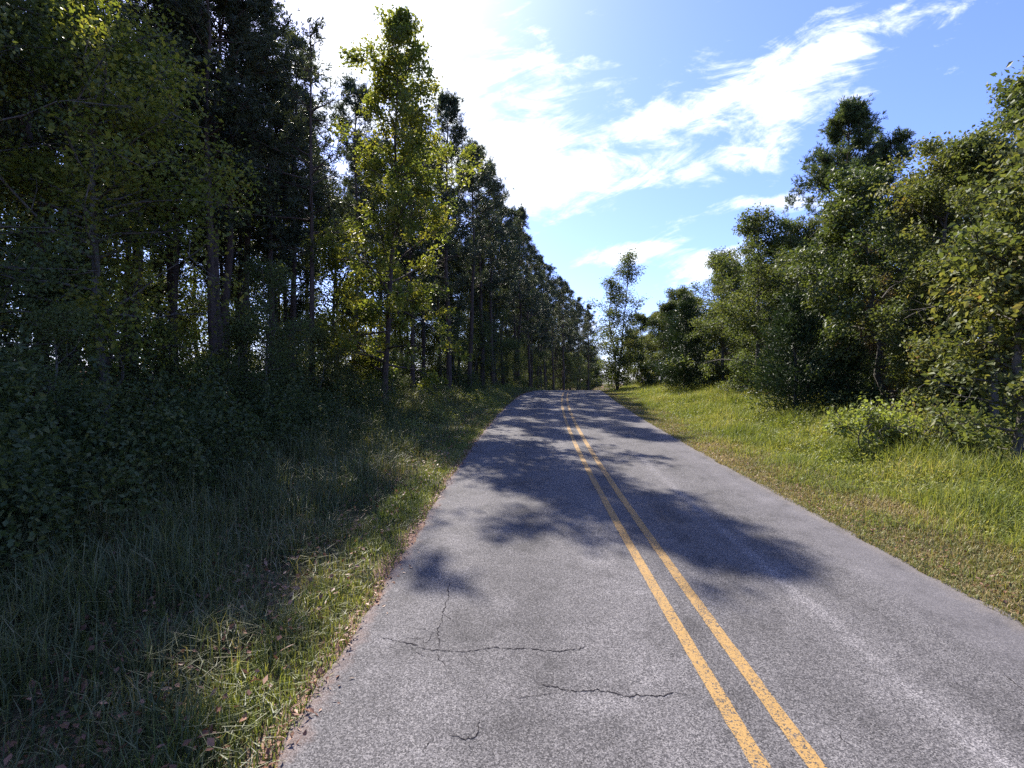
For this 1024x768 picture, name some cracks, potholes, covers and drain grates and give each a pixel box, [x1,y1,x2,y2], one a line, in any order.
crack [508,676,686,698]
crack [376,583,587,679]
